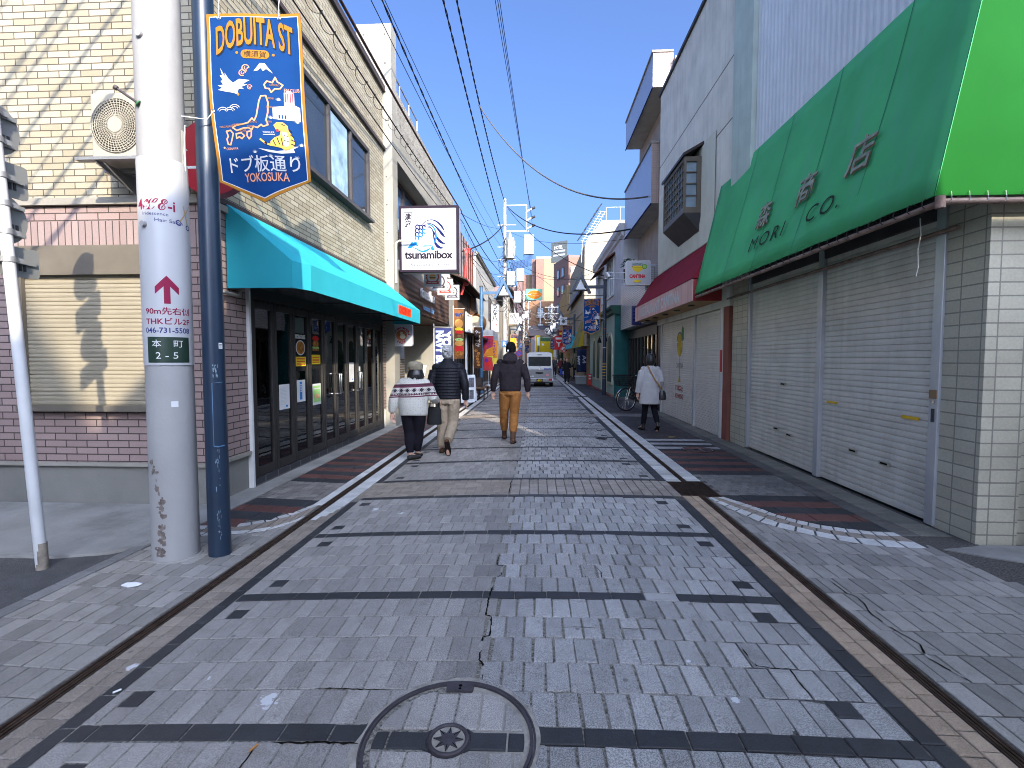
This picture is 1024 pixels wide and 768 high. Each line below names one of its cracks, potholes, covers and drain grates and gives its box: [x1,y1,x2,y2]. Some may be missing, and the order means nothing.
crack [829,580,975,684]
manhole cover [347,677,545,768]
